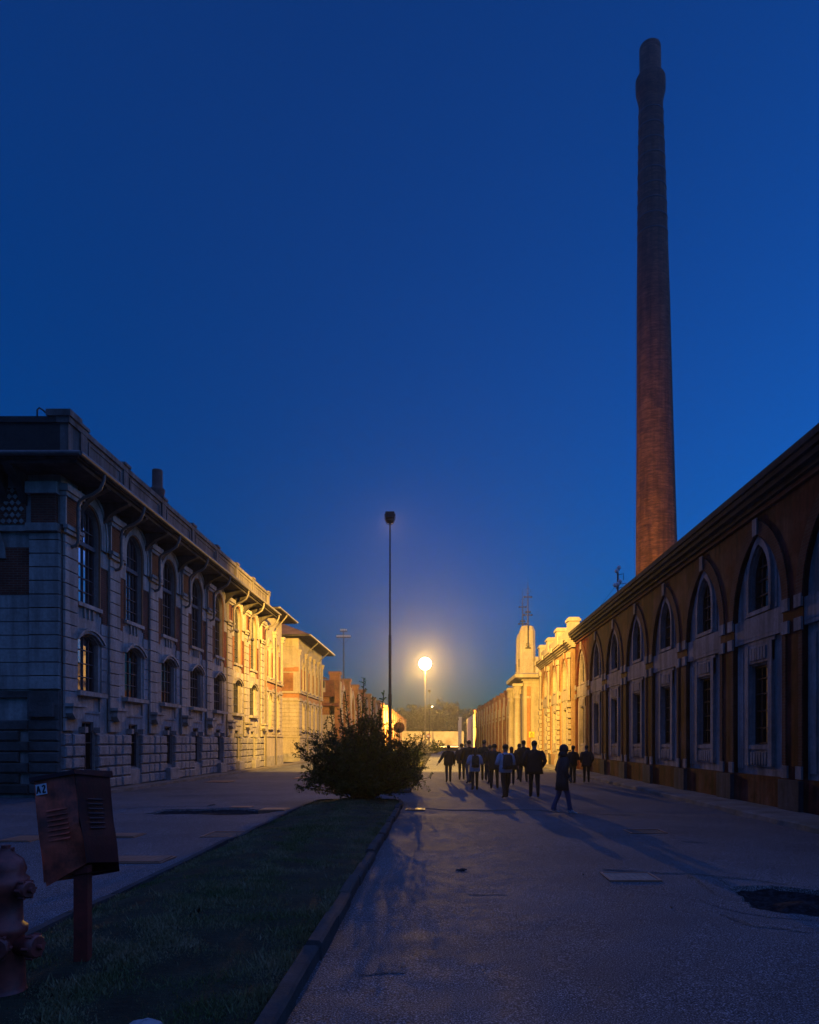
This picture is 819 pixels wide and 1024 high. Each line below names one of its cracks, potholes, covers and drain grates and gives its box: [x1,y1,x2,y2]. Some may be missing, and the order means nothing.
manhole cover [599,872,662,882]
manhole cover [118,856,176,864]
pothole [695,883,819,921]
